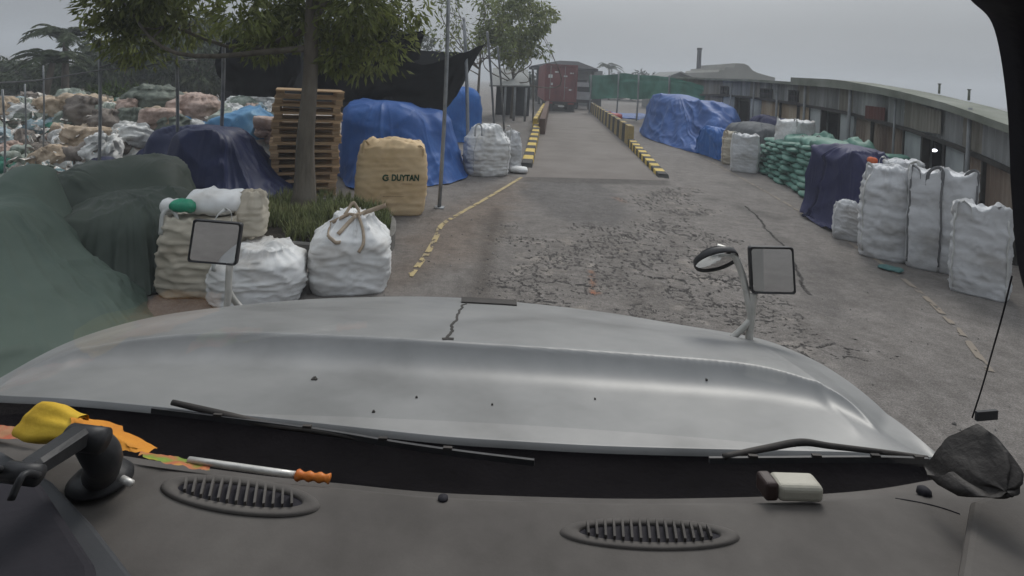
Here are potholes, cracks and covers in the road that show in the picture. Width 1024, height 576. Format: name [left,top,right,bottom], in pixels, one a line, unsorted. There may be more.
crack [427,188,899,364]
